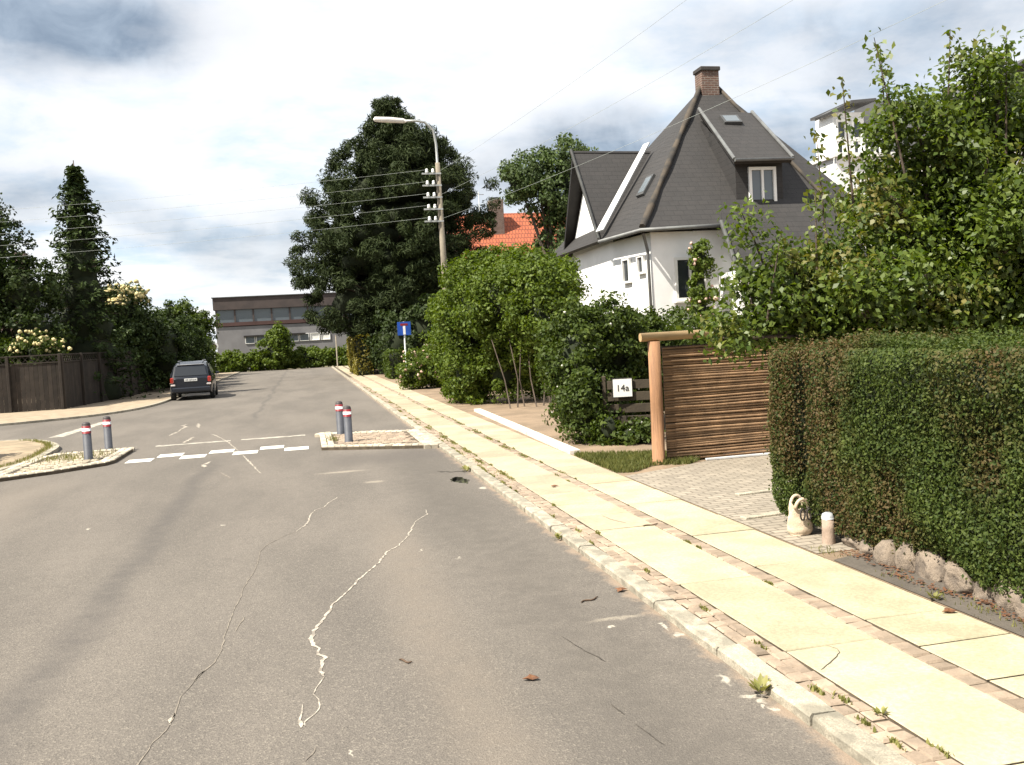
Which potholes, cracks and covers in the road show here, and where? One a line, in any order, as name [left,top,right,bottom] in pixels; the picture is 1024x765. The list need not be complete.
crack [298,511,428,761]
crack [136,497,337,765]
